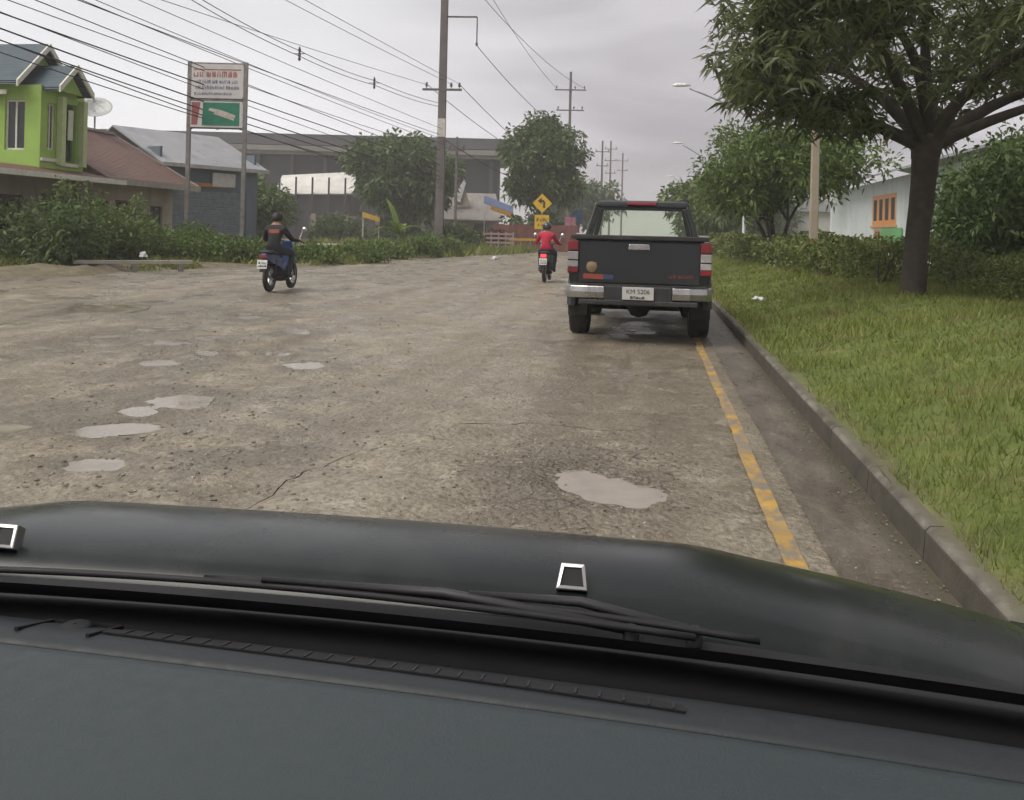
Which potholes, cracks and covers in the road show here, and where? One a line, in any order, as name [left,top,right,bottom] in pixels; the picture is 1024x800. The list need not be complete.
crack [247,445,385,509]
crack [489,440,675,527]
